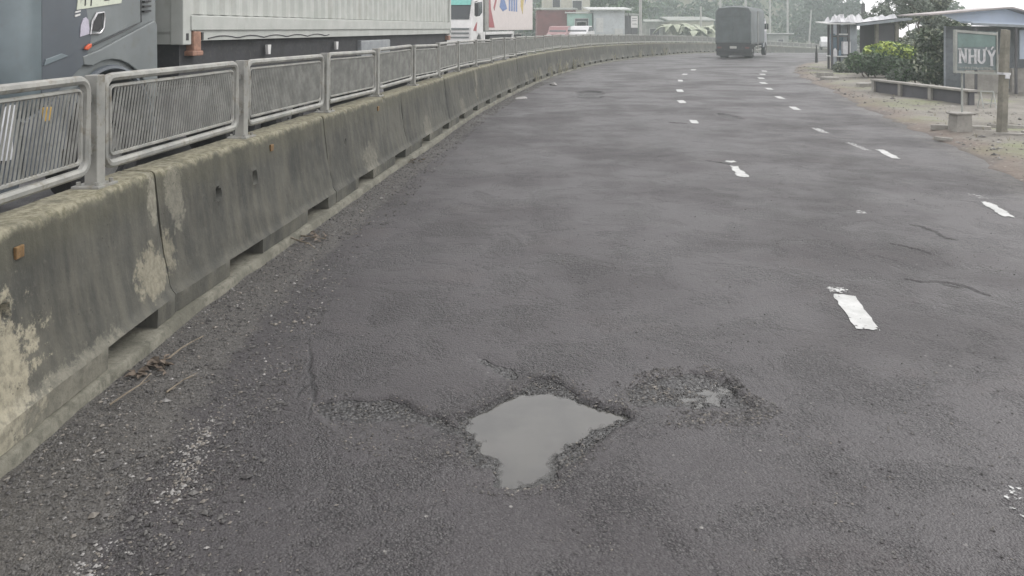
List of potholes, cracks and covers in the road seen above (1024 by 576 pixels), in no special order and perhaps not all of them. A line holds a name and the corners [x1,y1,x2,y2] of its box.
pothole [308,391,475,465]
pothole [611,365,784,430]
pothole [439,352,644,499]
crack [889,224,959,255]
crack [901,278,993,297]
crack [294,339,320,419]
